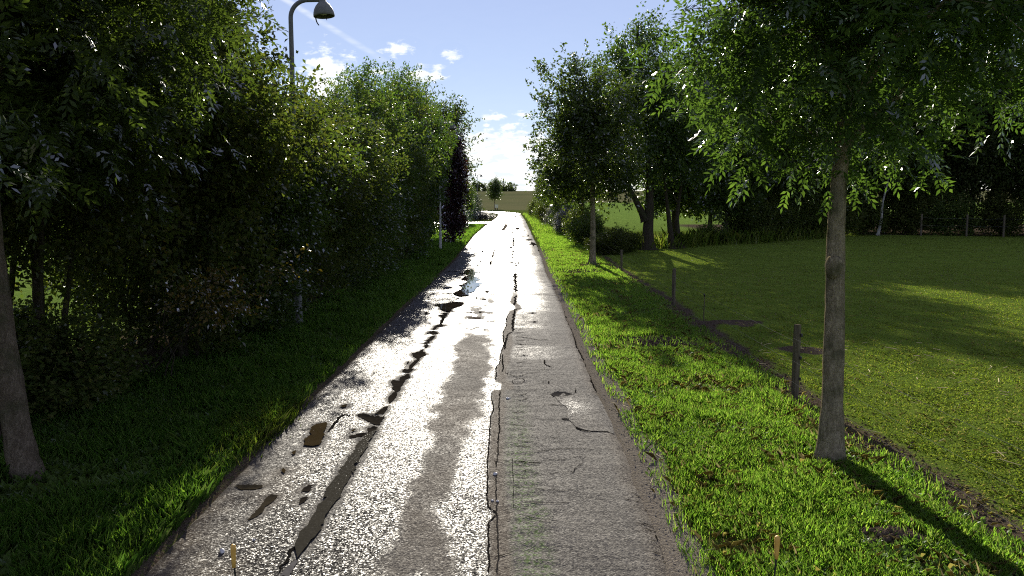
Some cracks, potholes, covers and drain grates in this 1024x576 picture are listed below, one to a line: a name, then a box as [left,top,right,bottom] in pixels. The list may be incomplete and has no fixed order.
pothole [303,422,327,446]
pothole [248,494,278,520]
crack [486,294,613,572]
crack [302,414,358,432]
crack [279,546,295,572]
pothole [358,413,384,425]
